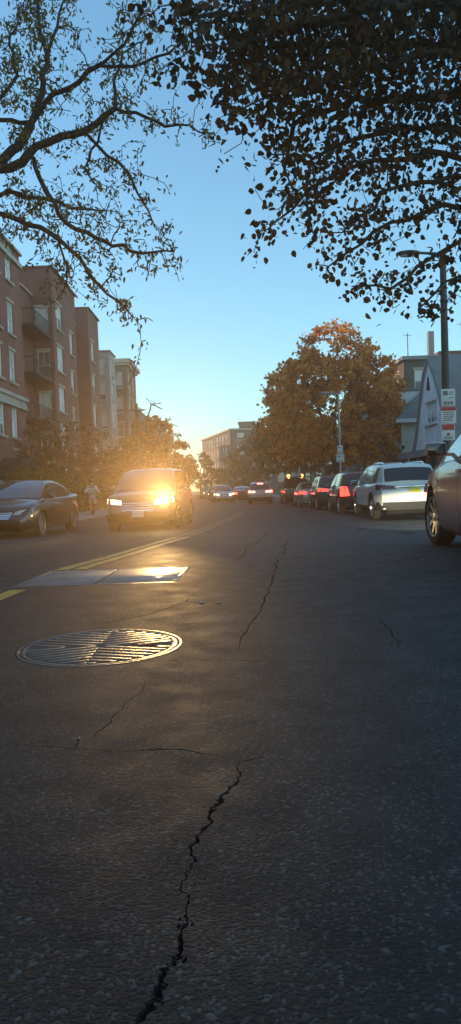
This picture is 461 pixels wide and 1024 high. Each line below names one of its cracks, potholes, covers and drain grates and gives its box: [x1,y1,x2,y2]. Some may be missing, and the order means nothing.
crack [156,532,451,663]
crack [93,682,145,738]
manhole cover [15,629,183,667]
crack [134,757,260,1024]
